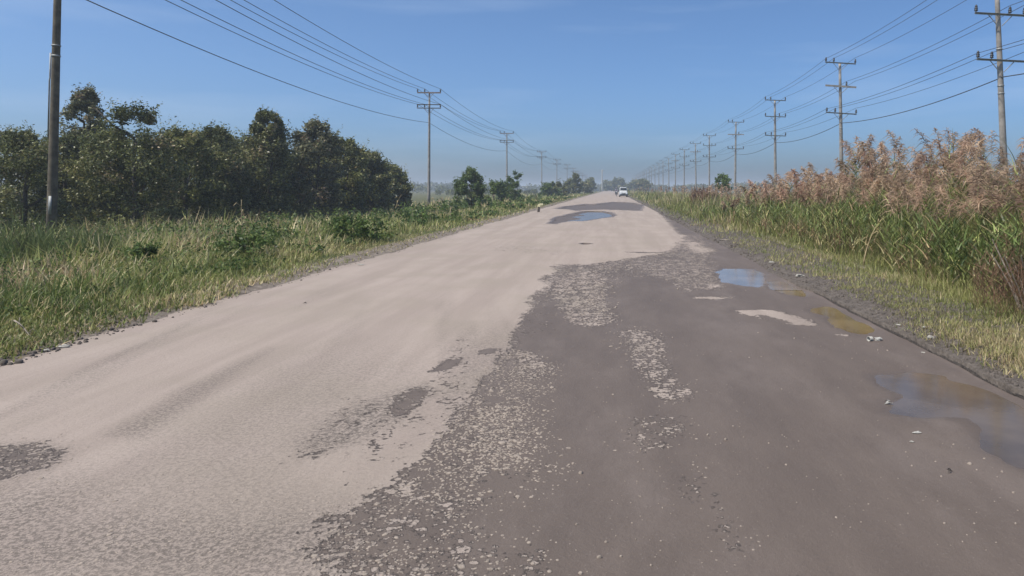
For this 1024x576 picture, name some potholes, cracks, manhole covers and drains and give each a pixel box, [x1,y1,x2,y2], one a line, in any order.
pothole [550,211,613,224]
